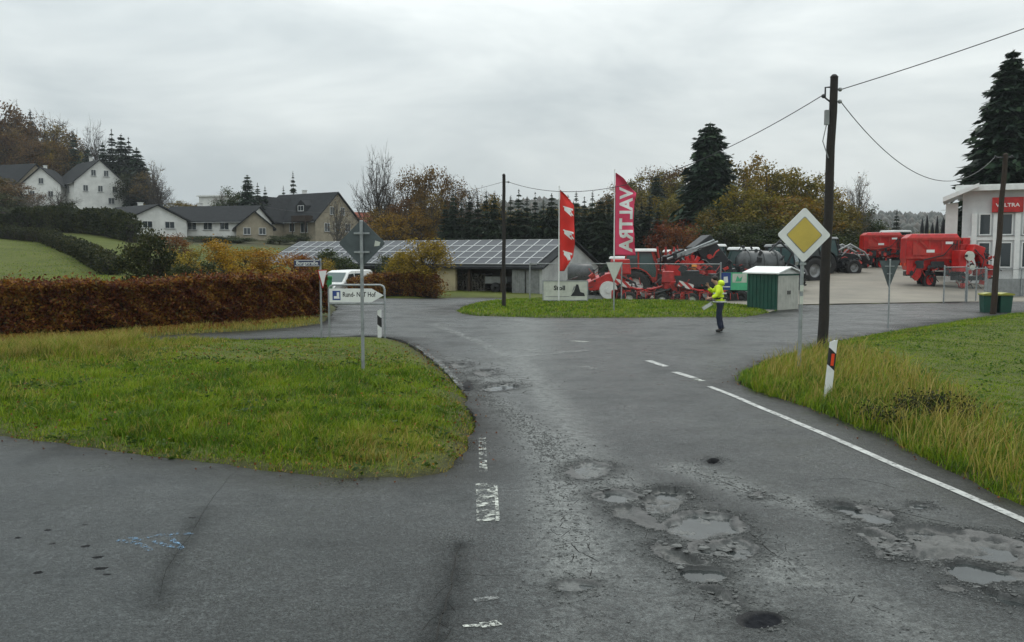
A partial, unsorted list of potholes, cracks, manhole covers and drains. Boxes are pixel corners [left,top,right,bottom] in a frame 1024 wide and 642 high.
pothole [687,536,762,560]
pothole [894,524,1024,567]
pothole [609,504,666,530]
pothole [556,578,601,591]
pothole [677,566,729,583]
pothole [827,502,898,524]
pothole [736,611,784,629]
pothole [850,526,912,560]
pothole [939,584,965,592]
pothole [650,540,709,566]
pothole [480,382,520,392]
pothole [942,560,1024,585]
